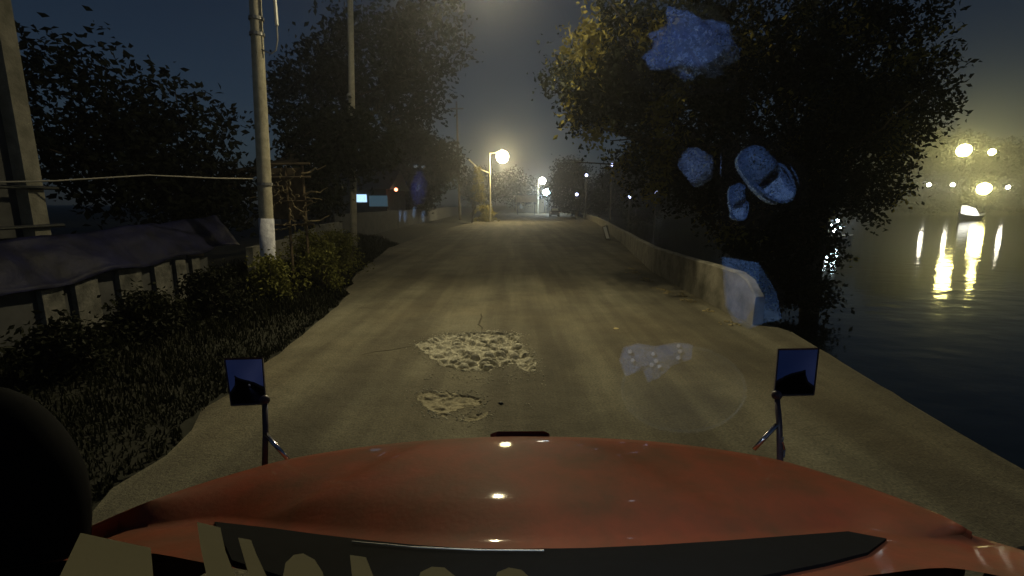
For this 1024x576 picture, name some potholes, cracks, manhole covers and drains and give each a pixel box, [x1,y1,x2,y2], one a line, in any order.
pothole [415,330,537,372]
pothole [416,391,482,417]
